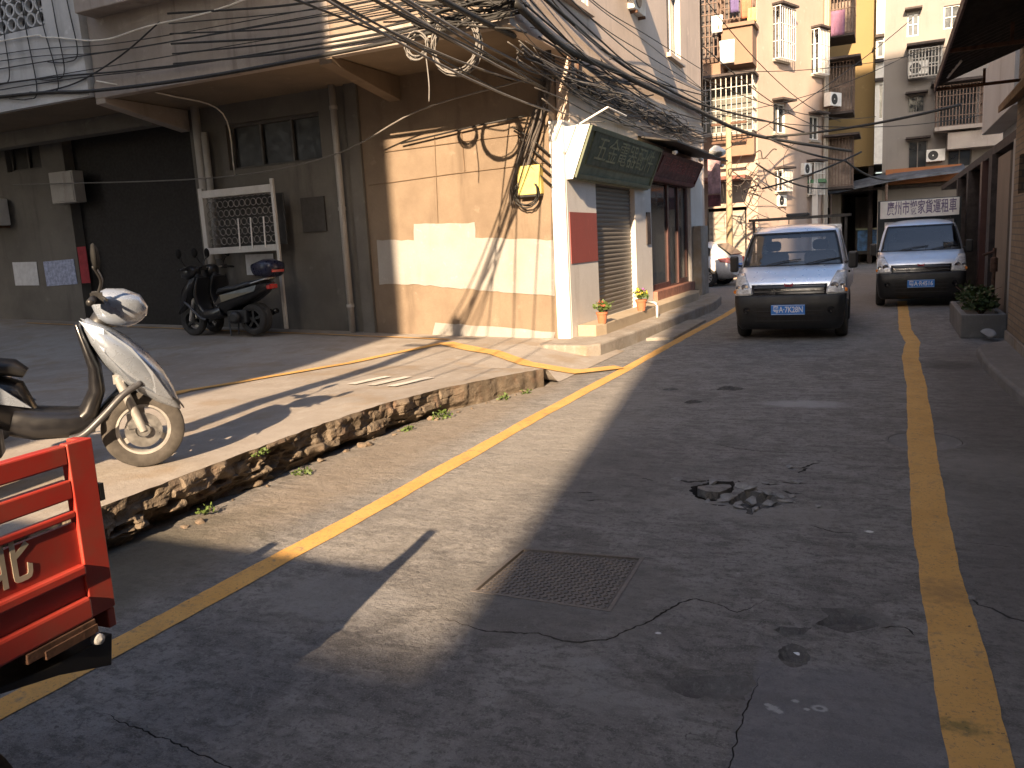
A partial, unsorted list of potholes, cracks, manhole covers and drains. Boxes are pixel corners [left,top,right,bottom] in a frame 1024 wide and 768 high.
crack [104,713,232,768]
pothole [689,481,735,501]
crack [712,462,820,506]
pothole [816,608,879,633]
pothole [778,643,811,668]
crack [973,600,1024,622]
manhole cover [885,432,966,450]
pothole [729,490,781,515]
manhole cover [470,548,645,612]
